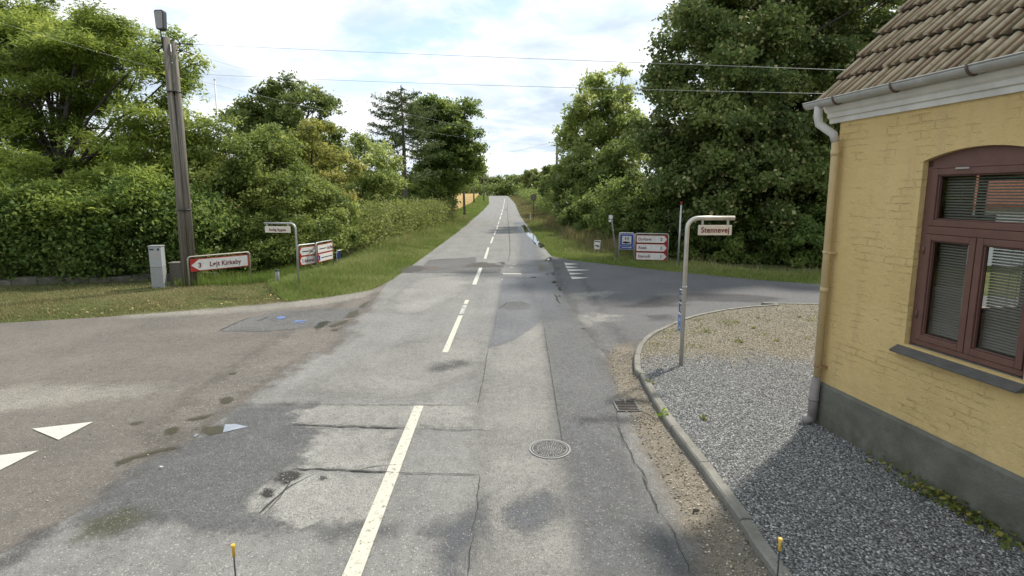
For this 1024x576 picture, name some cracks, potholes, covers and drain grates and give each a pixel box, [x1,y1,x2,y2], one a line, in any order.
manhole cover [526,439,575,462]
pothole [273,470,301,485]
crack [259,465,480,576]
drain grate [612,401,642,412]
